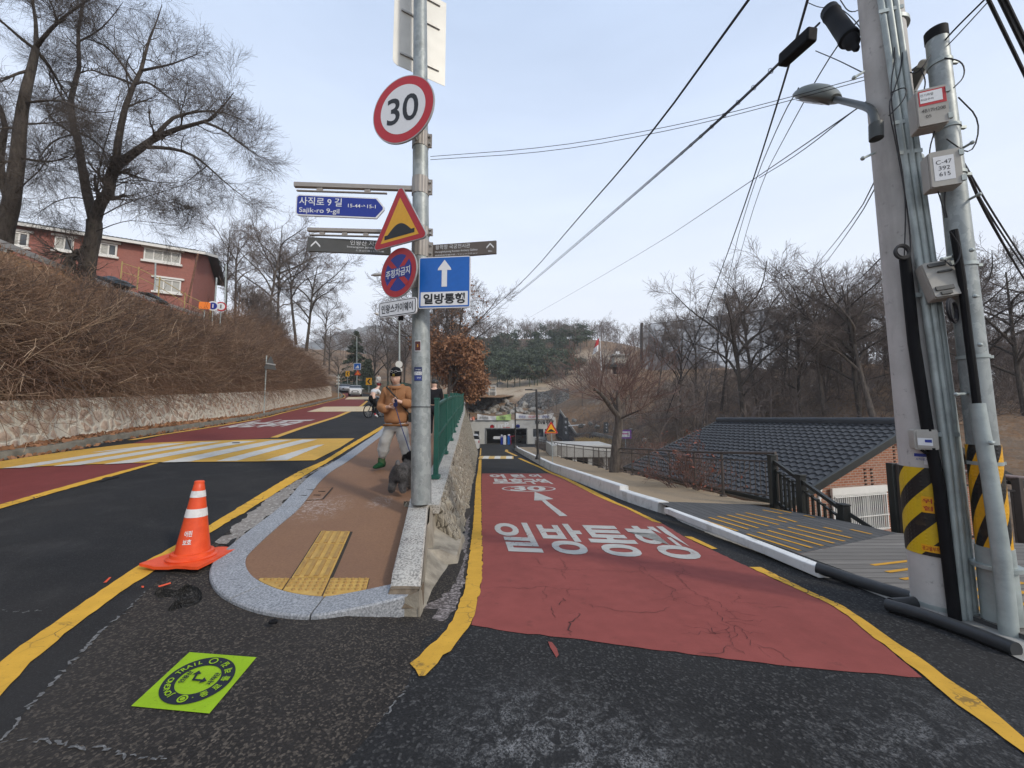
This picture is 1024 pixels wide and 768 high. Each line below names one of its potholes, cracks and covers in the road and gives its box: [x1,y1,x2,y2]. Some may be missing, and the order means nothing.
pothole [154,584,202,611]
crack [491,558,794,663]
crack [0,738,167,760]
